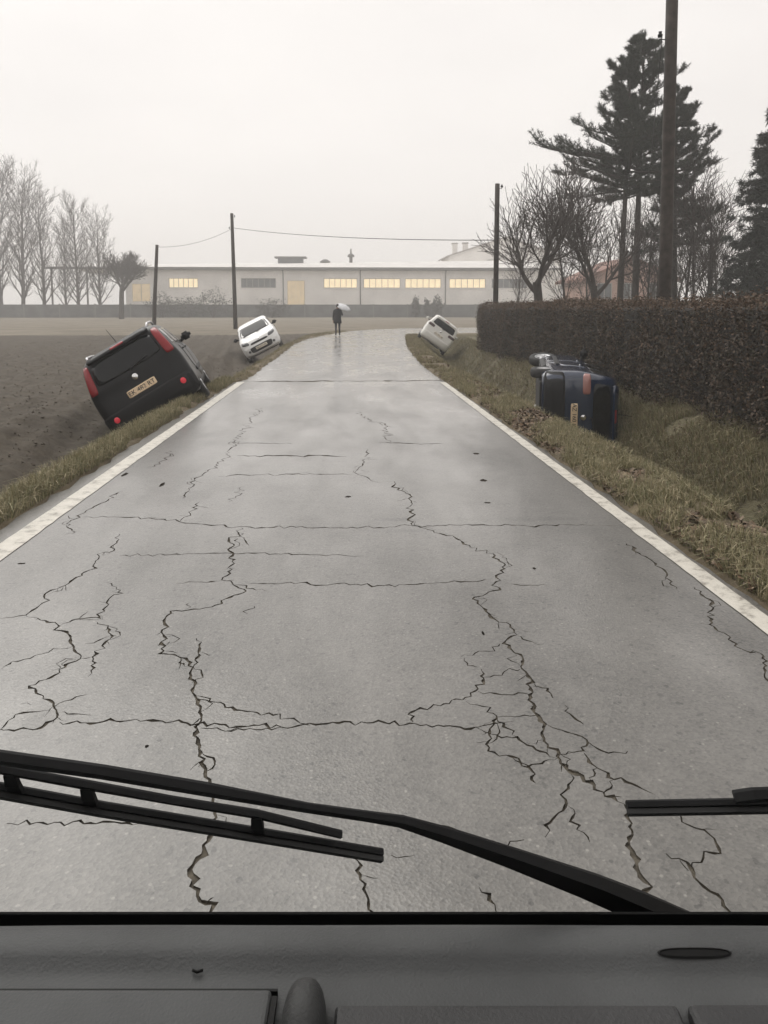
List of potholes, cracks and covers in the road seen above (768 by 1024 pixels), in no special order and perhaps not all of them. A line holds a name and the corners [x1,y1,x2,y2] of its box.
crack [694,587,768,681]
crack [0,409,731,912]
